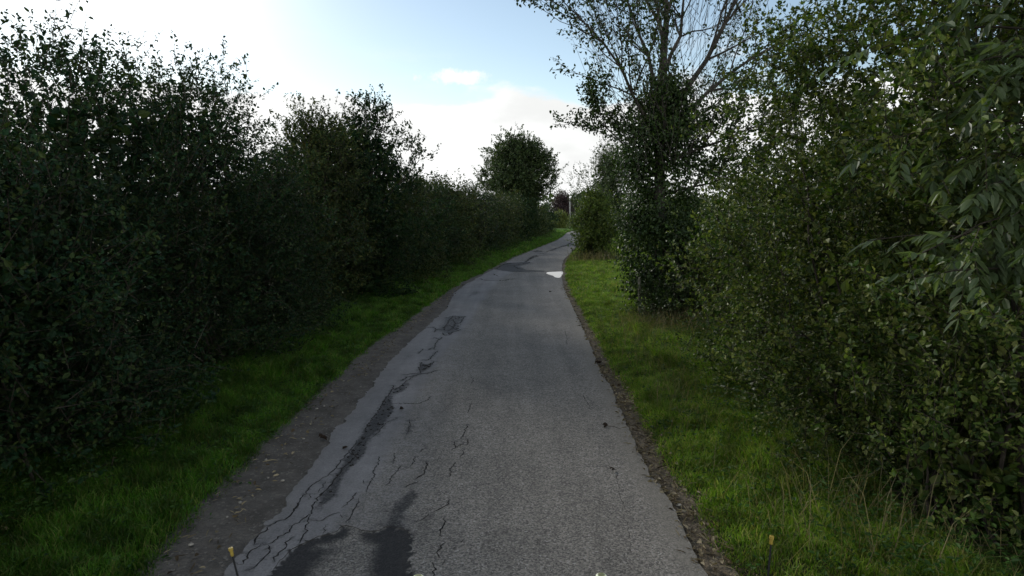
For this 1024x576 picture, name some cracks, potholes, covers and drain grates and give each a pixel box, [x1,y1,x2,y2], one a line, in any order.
crack [235,337,471,576]
